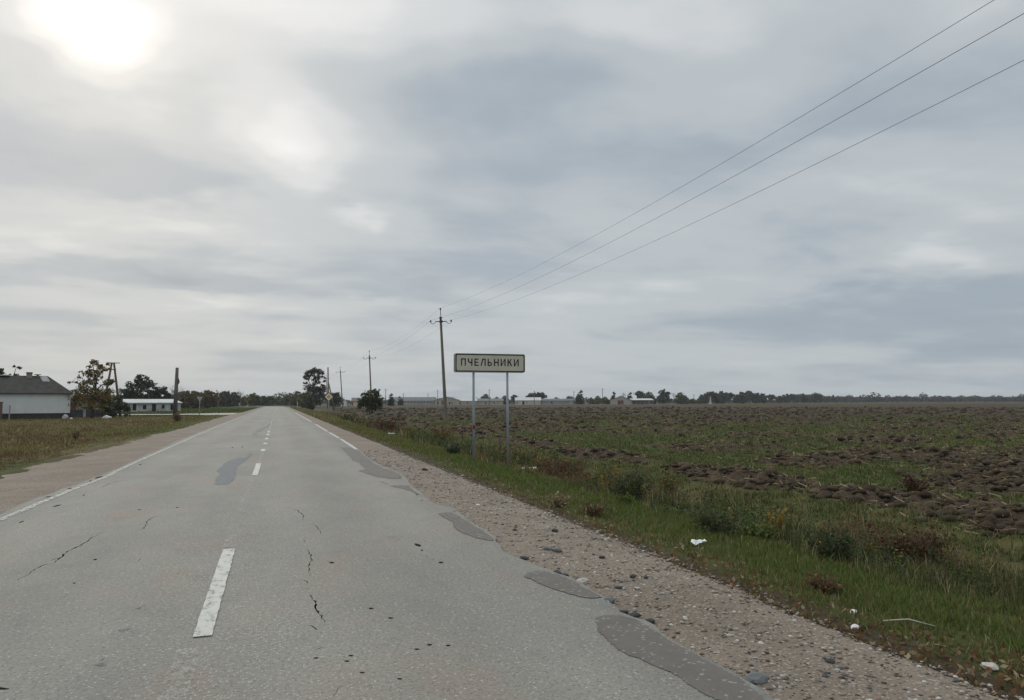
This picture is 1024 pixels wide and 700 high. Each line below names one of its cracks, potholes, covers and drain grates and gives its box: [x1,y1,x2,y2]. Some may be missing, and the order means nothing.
crack [18,532,102,580]
crack [290,508,325,629]
